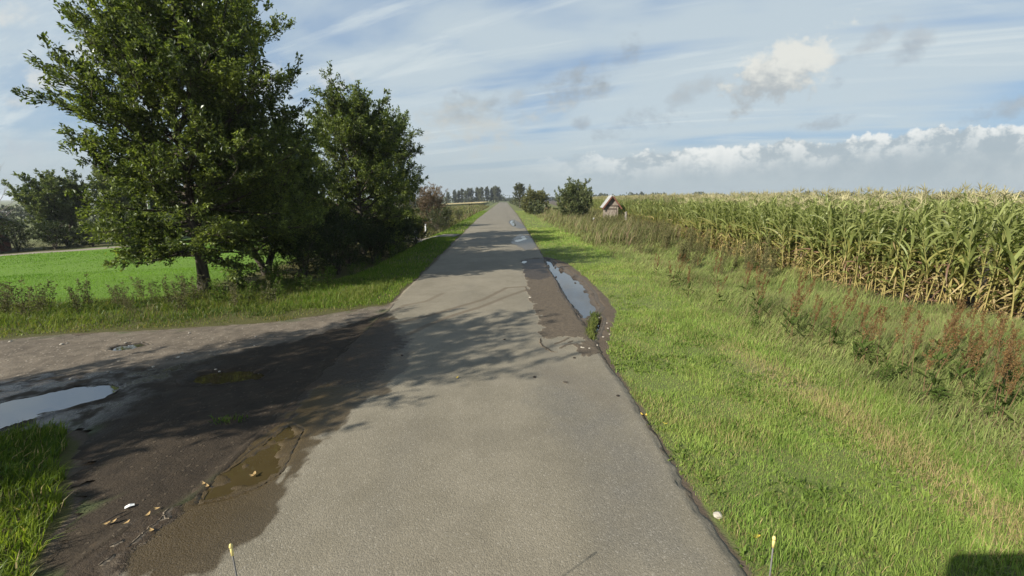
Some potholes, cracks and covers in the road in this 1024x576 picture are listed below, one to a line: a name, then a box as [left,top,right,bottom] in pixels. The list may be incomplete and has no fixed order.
pothole [100,340,153,353]
pothole [175,364,274,387]
pothole [198,423,304,505]
pothole [0,381,129,432]
pothole [544,258,605,320]
